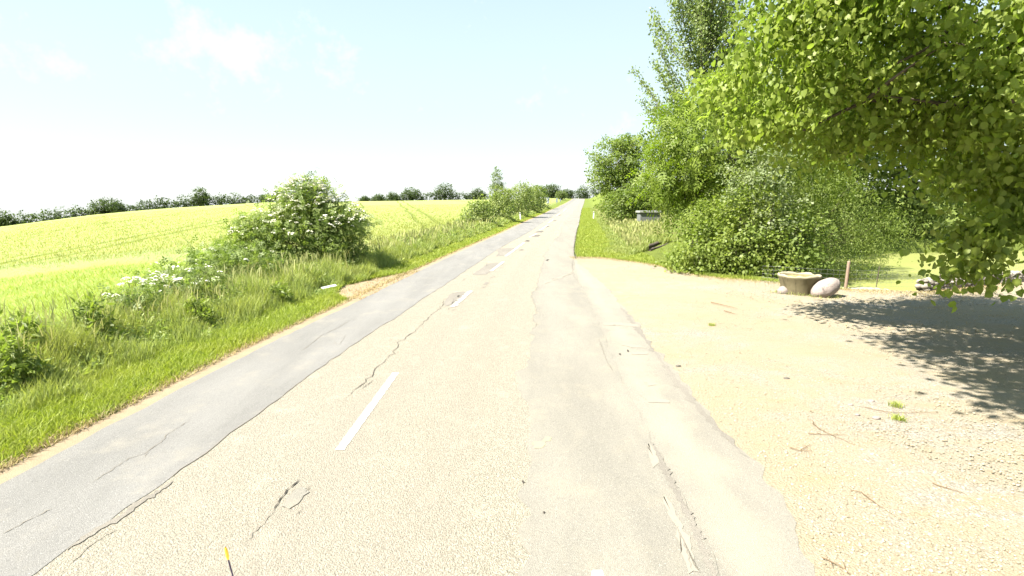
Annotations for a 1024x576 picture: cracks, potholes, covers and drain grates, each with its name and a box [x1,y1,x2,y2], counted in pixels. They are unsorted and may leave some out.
crack [247,480,309,540]
crack [345,278,465,400]
